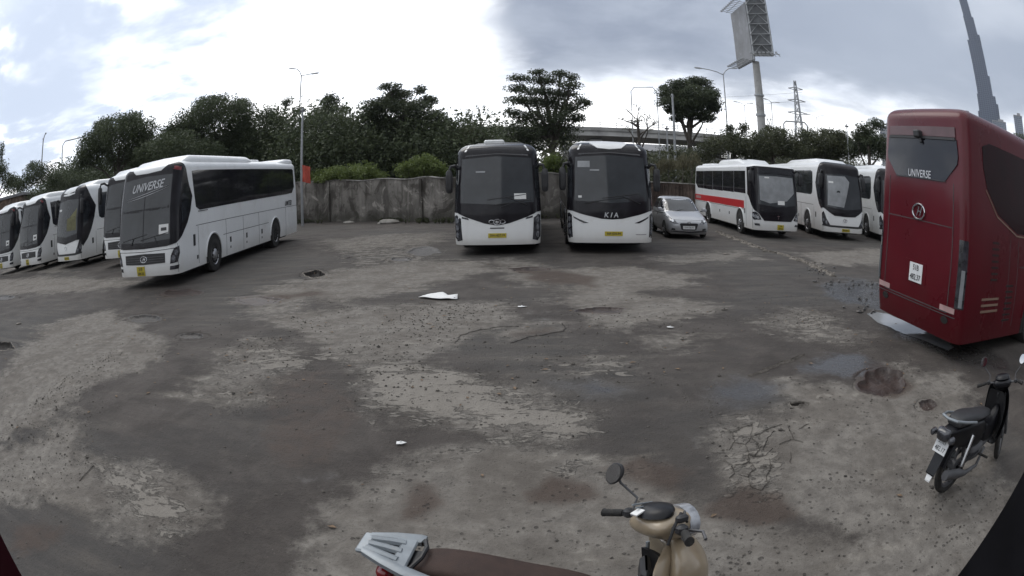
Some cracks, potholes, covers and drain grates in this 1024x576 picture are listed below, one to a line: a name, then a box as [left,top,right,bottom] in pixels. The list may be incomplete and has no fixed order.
pothole [787,401,808,409]
pothole [915,399,939,413]
pothole [300,269,330,280]
crack [455,322,566,343]
pothole [571,306,630,315]
pothole [853,367,914,400]
crack [723,424,808,491]
pothole [0,341,19,353]
